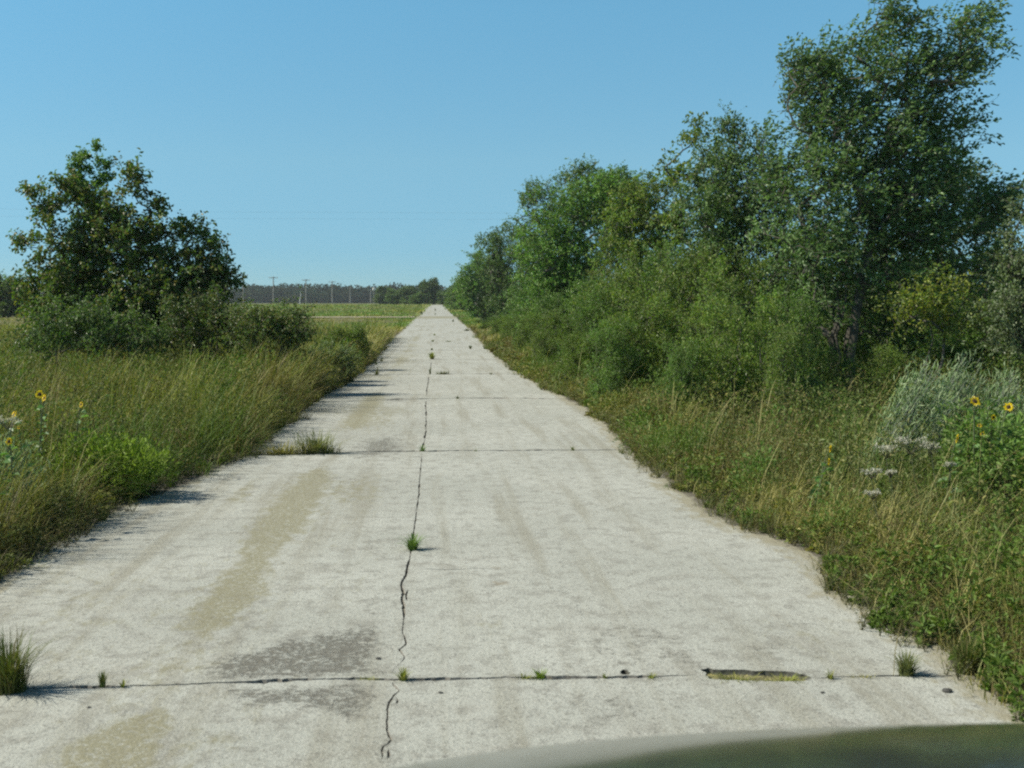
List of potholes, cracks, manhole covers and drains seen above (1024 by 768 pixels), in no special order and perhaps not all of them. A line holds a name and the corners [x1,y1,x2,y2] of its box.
pothole [700,668,811,681]
crack [380,362,432,759]
